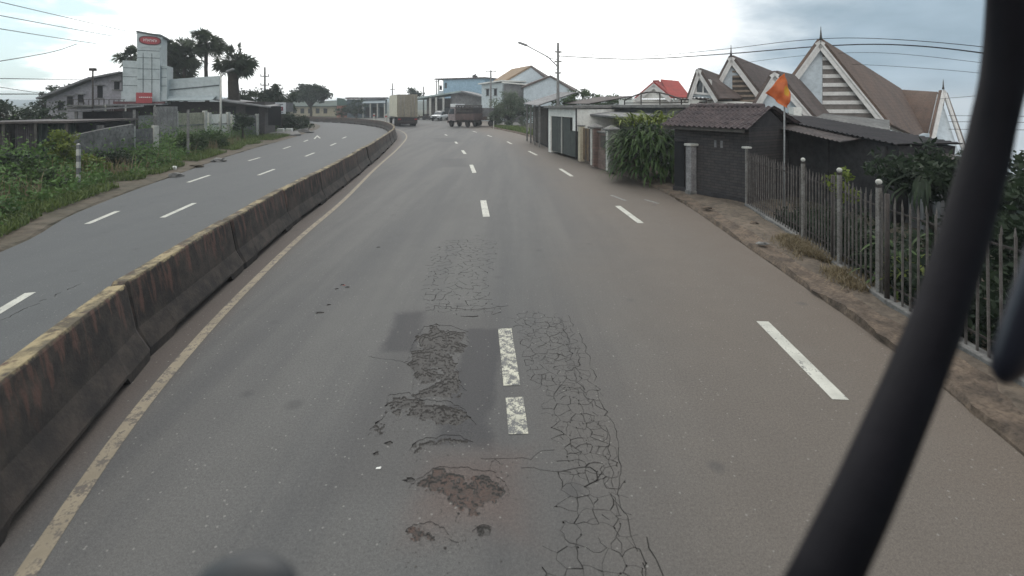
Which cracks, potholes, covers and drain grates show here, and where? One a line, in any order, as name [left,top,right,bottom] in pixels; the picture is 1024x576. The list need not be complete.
pothole [405,521,459,554]
crack [481,310,664,576]
pothole [408,466,510,520]
pothole [405,323,470,402]
crack [421,240,501,315]
pothole [472,524,492,537]
pothole [368,392,476,438]
